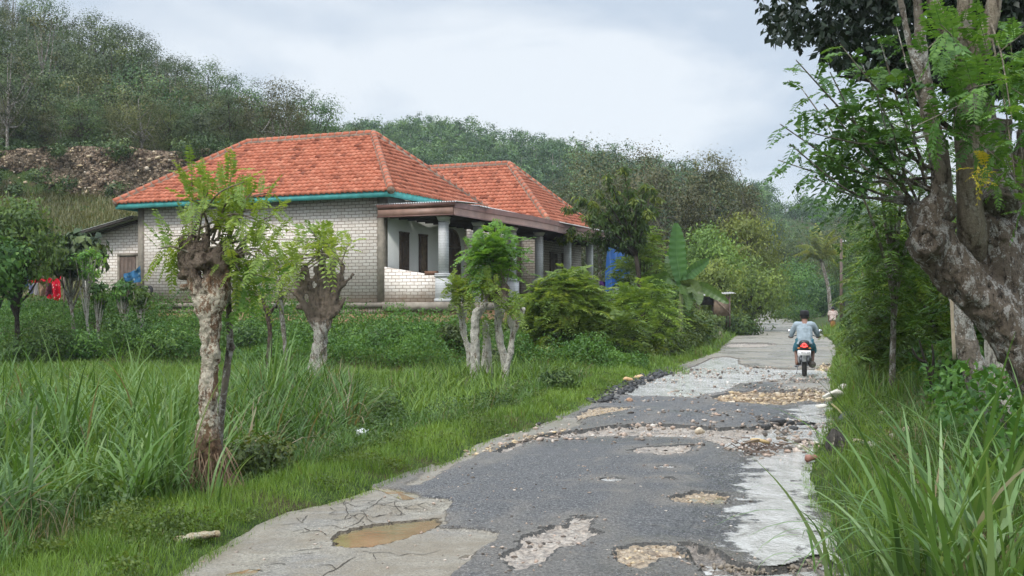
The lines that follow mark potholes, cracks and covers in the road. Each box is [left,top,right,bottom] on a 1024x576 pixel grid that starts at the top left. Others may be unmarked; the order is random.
pothole [667,490,732,505]
pothole [628,356,815,397]
crack [251,497,436,576]
pothole [574,406,633,420]
pothole [711,387,828,405]
pothole [611,542,689,569]
pothole [625,444,693,455]
pothole [330,518,443,548]
pothole [493,421,819,453]
pothole [496,515,605,570]
